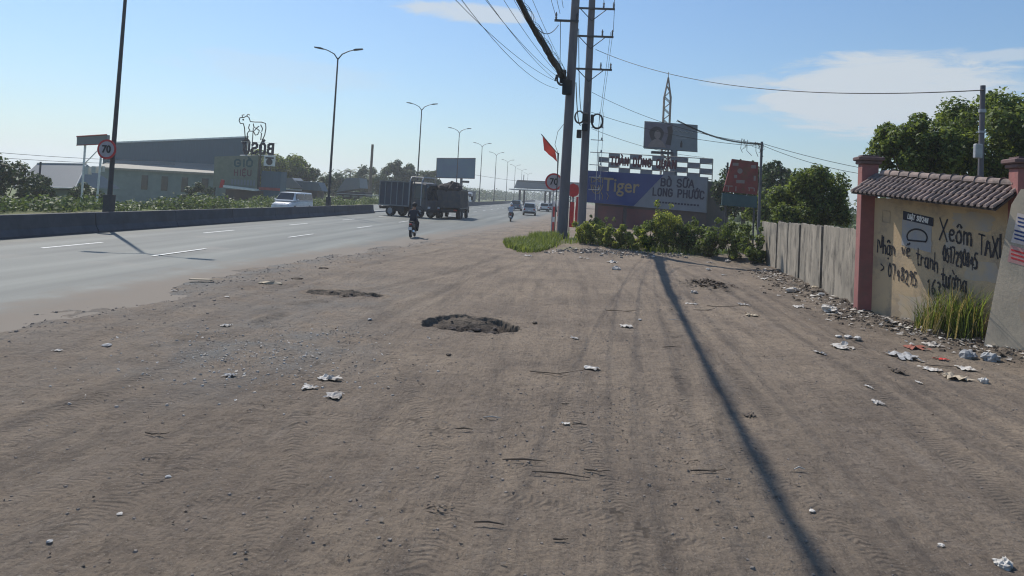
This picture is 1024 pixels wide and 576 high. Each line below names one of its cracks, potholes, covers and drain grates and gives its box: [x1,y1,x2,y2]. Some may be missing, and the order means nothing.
pothole [298,289,391,299]
pothole [410,313,532,336]
